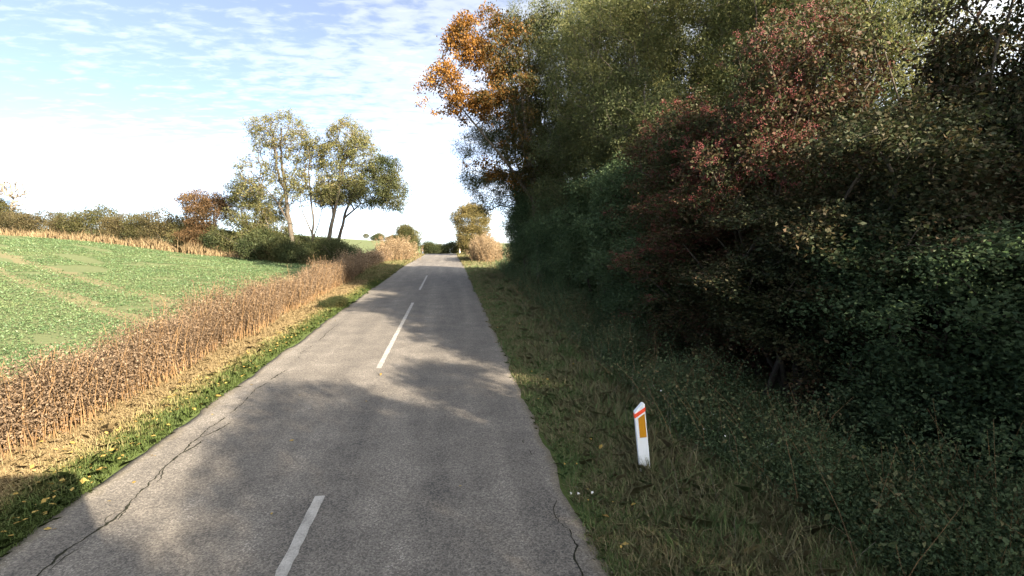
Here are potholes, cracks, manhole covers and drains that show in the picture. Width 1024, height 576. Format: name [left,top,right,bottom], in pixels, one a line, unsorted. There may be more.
crack [553,498,584,576]
crack [37,352,301,576]
